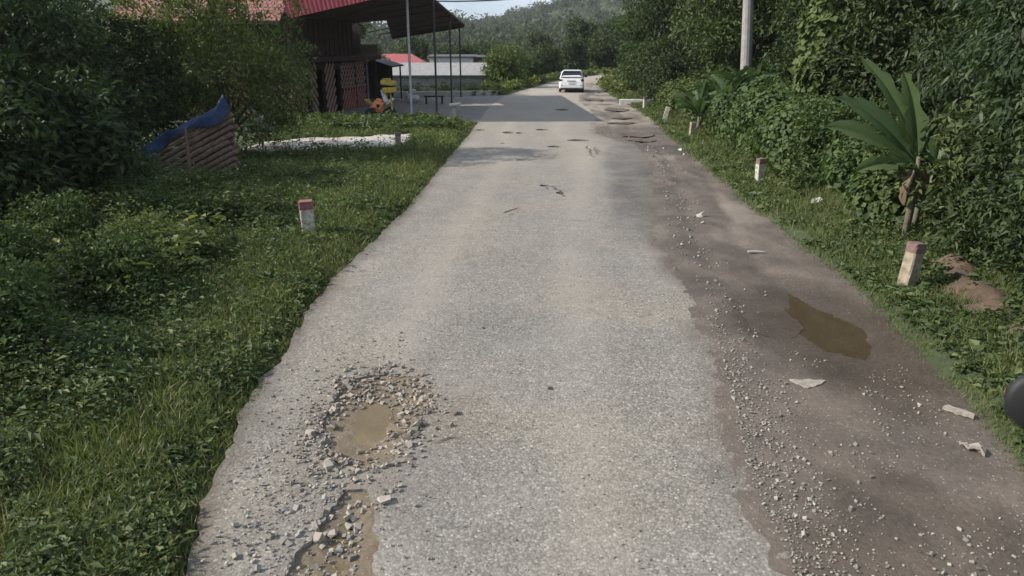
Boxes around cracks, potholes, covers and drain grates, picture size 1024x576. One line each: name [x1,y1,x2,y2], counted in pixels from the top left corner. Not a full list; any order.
pothole [323,375,434,472]
pothole [288,492,380,576]
